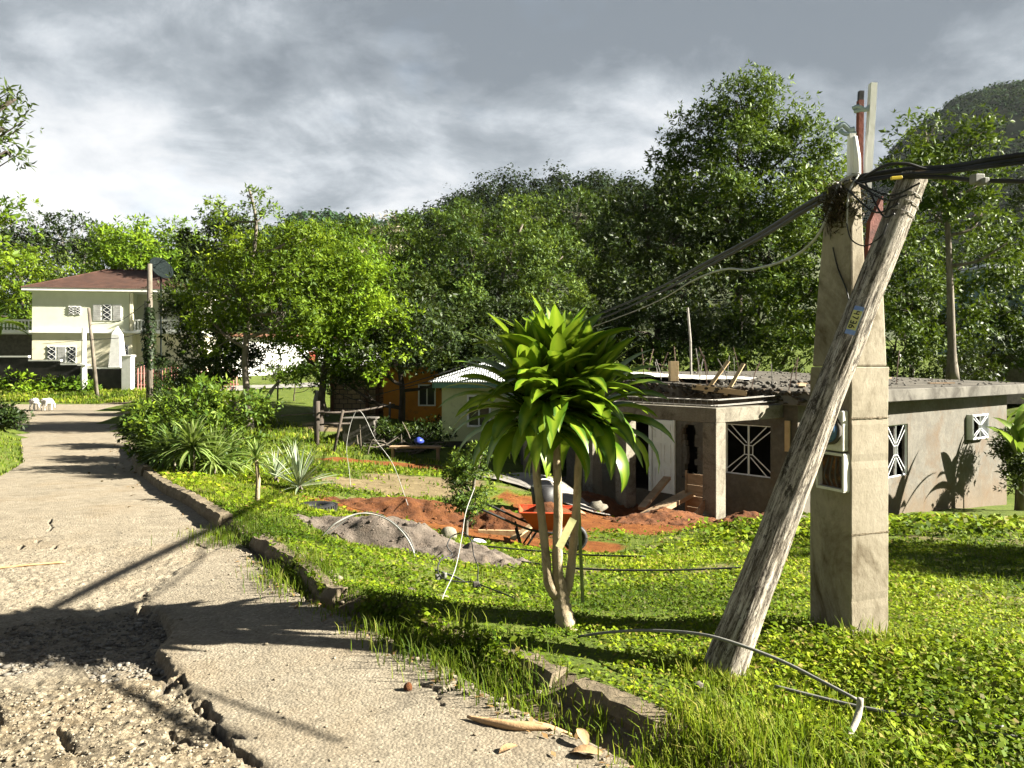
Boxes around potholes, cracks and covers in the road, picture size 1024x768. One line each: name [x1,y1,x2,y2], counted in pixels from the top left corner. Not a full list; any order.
crack [154,673,268,768]
crack [15,518,60,551]
pothole [51,701,71,713]
